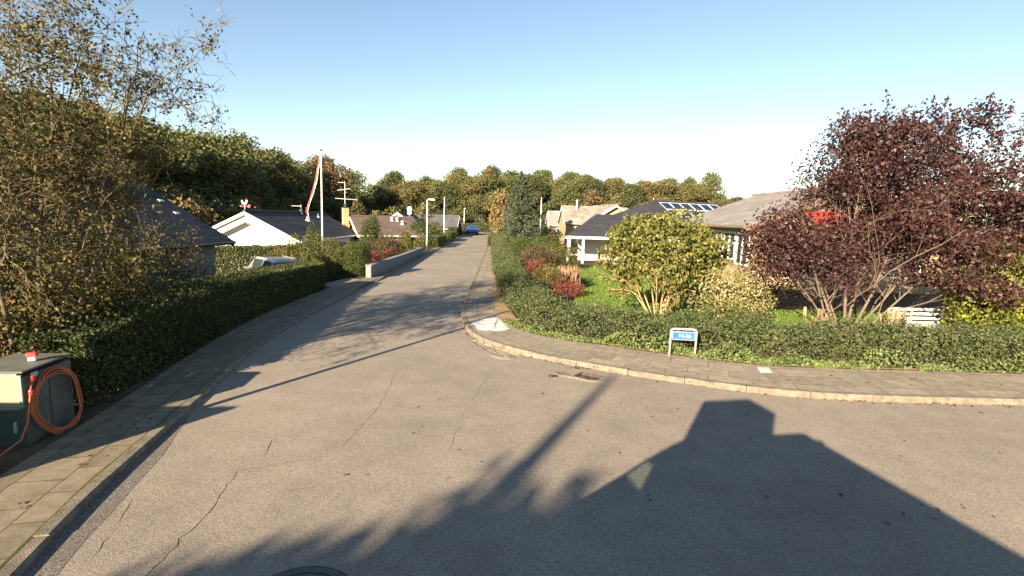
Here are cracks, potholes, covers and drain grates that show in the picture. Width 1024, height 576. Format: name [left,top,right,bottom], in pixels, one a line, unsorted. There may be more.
crack [147,370,397,576]
manhole cover [273,566,347,576]
